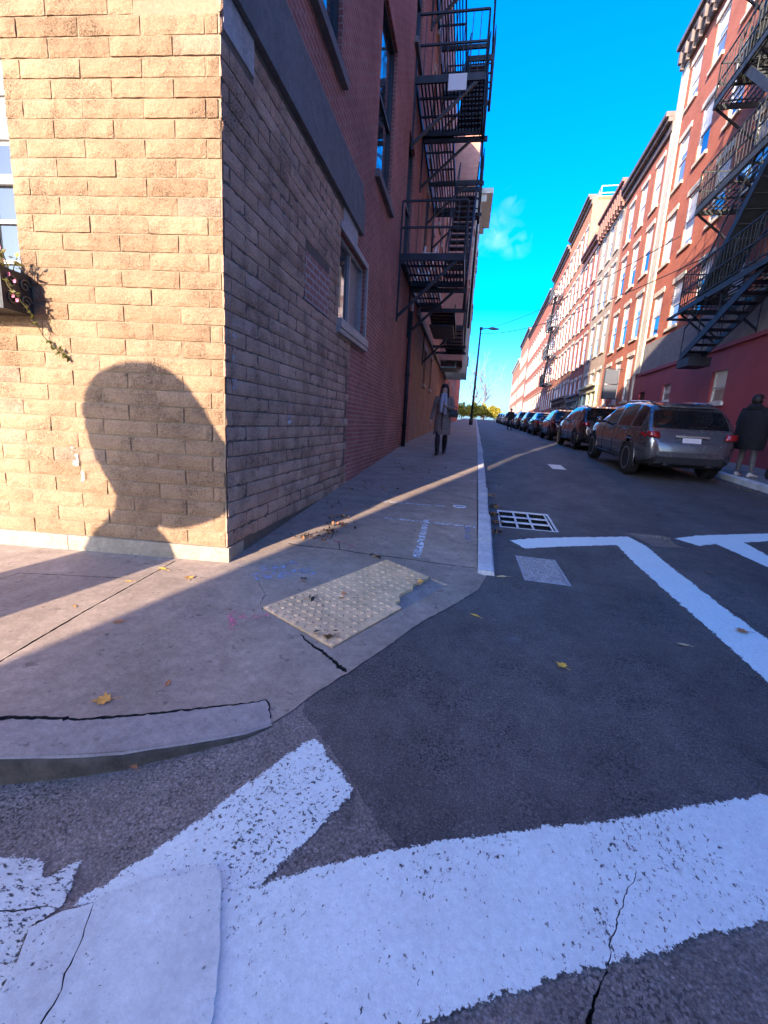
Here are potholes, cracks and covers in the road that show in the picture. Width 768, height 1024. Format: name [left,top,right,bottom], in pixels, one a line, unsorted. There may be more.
crack [585,873,636,1024]
crack [40,903,94,1024]
drain grate [497,510,559,532]
